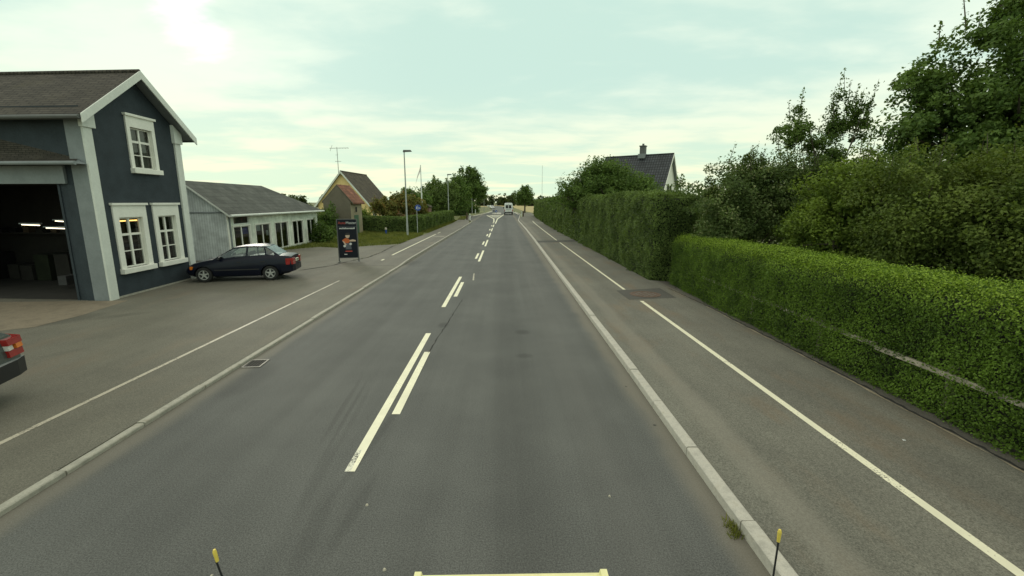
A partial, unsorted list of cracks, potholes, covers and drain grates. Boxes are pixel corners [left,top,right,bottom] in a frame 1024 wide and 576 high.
drain grate [240,359,270,368]
